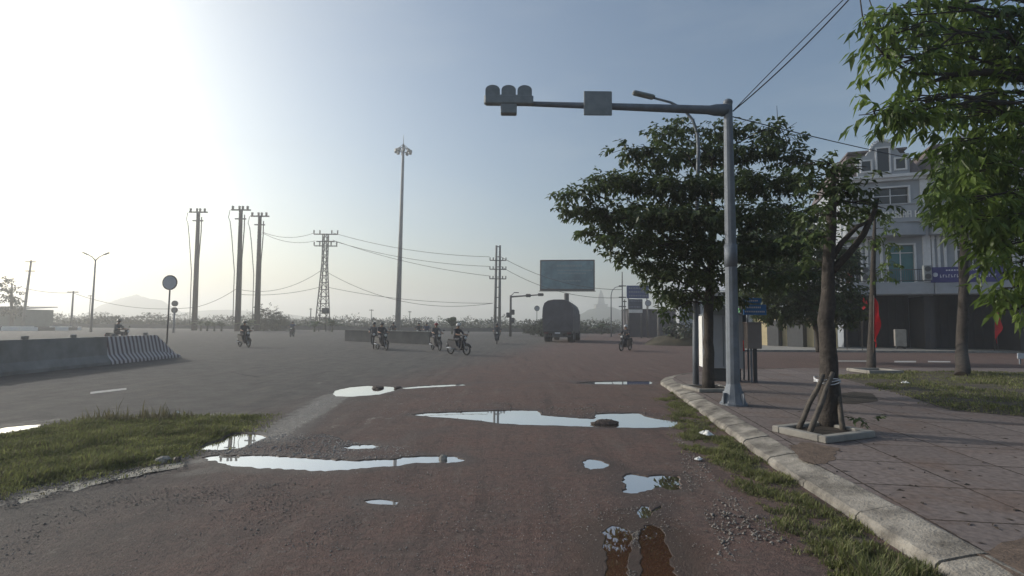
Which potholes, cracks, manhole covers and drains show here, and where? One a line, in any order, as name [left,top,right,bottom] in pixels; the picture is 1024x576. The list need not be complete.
pothole [412,410,678,428]
pothole [201,433,267,450]
pothole [638,524,678,576]
pothole [621,473,682,493]
pothole [201,454,466,471]
pothole [602,525,633,576]
pothole [332,385,402,397]
pothole [582,459,610,470]
